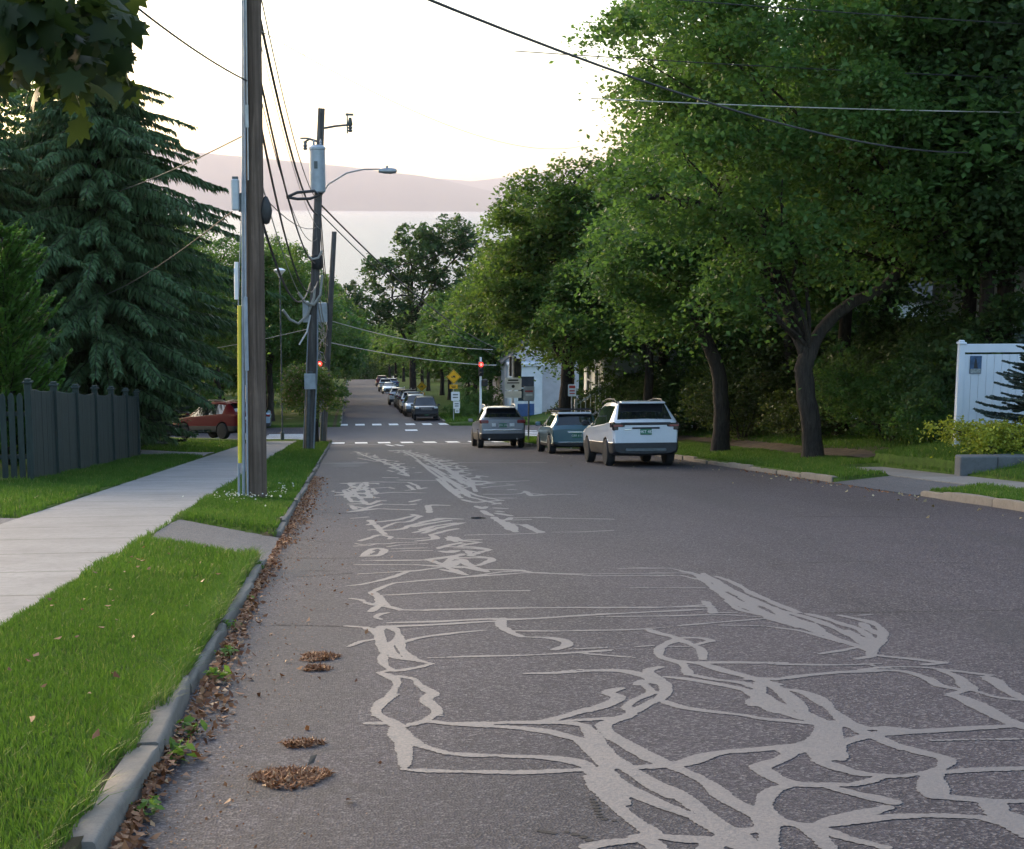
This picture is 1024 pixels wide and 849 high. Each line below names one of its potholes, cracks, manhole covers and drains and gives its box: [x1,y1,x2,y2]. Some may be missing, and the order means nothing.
crack [536,798,617,841]
